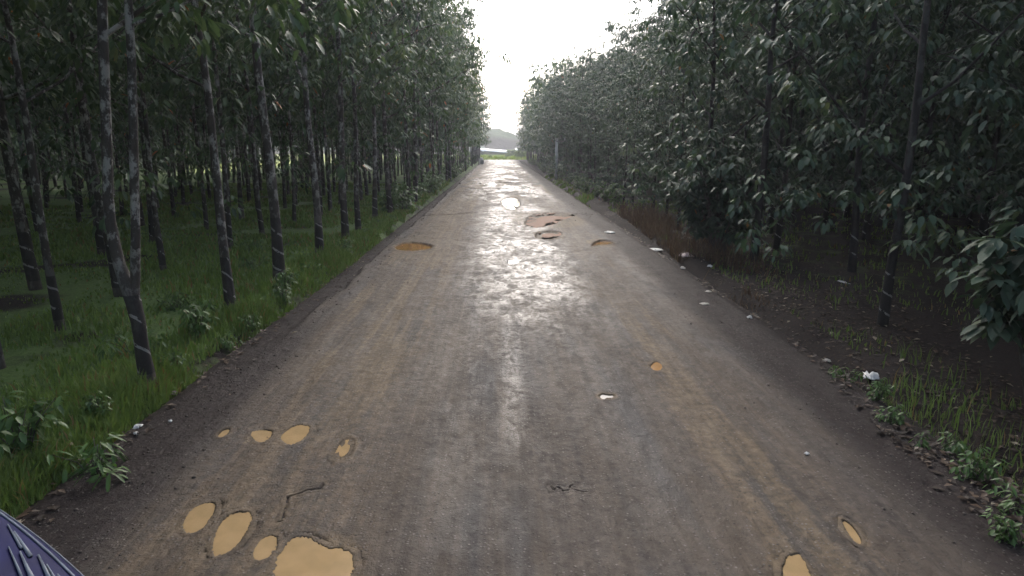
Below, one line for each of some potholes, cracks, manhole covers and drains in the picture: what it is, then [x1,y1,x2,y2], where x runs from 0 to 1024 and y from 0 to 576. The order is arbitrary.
pothole [837,515,867,549]
pothole [528,230,569,241]
crack [546,483,590,494]
pothole [205,507,258,562]
crack [275,482,330,522]
pothole [773,548,820,576]
pothole [273,421,317,448]
pothole [587,239,621,247]
pothole [245,531,285,566]
pothole [326,434,362,466]
pothole [175,498,222,538]
pothole [388,241,439,252]
